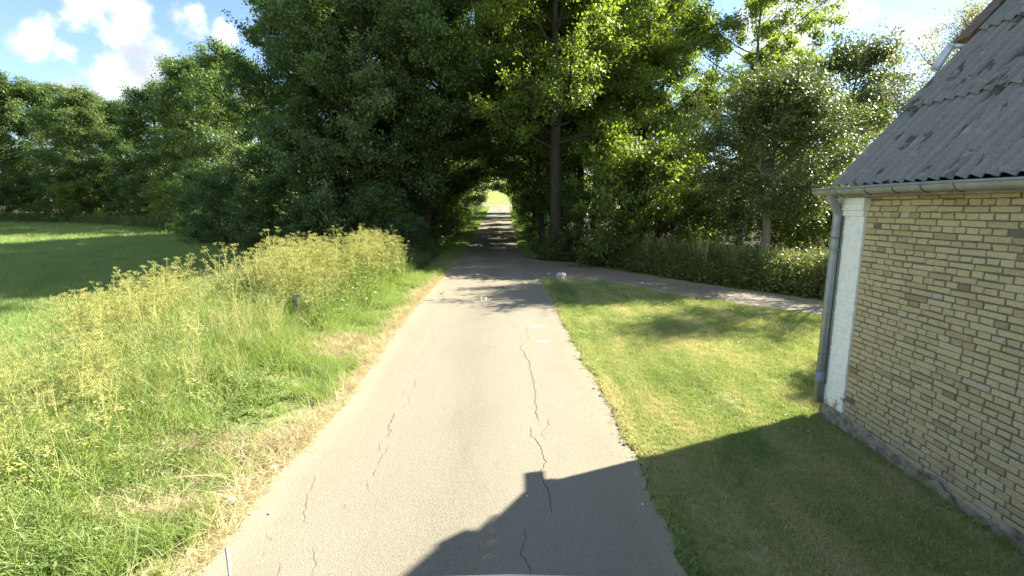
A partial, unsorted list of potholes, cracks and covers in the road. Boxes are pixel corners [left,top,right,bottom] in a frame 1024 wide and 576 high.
crack [506,320,552,515]
